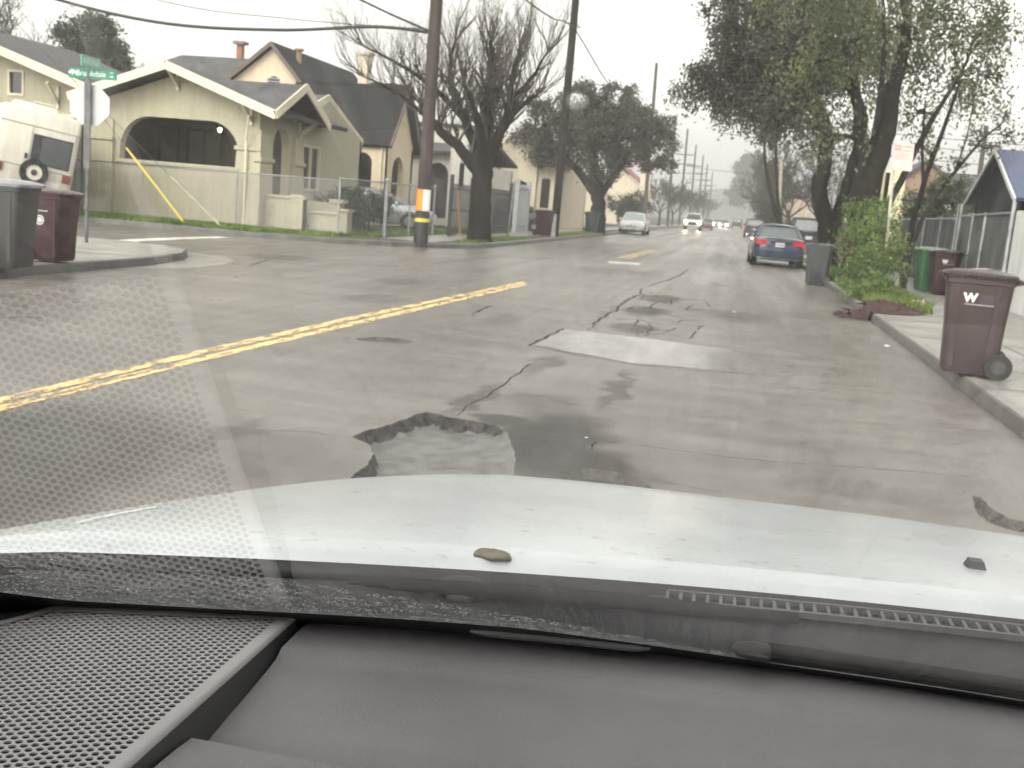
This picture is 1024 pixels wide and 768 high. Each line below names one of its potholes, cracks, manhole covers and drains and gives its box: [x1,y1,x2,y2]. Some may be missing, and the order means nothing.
crack [456,270,768,416]
pothole [971,495,1024,533]
pothole [350,412,516,479]
